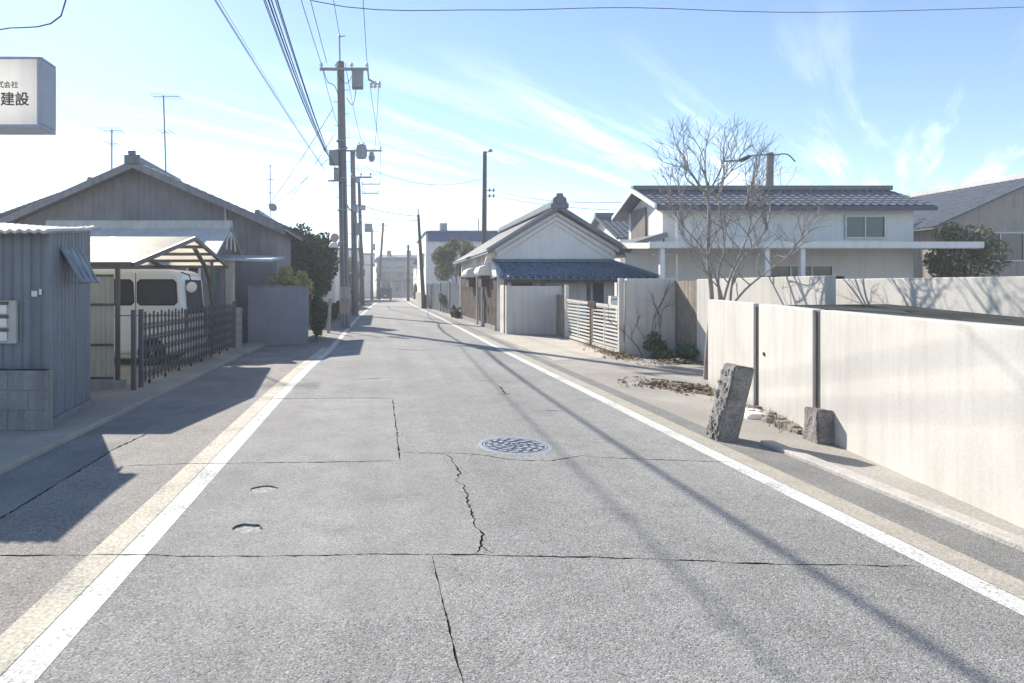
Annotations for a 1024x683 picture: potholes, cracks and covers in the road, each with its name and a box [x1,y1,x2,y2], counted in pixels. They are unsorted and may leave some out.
pothole [232,523,263,533]
manhole cover [478,437,552,455]
pothole [250,485,279,493]
